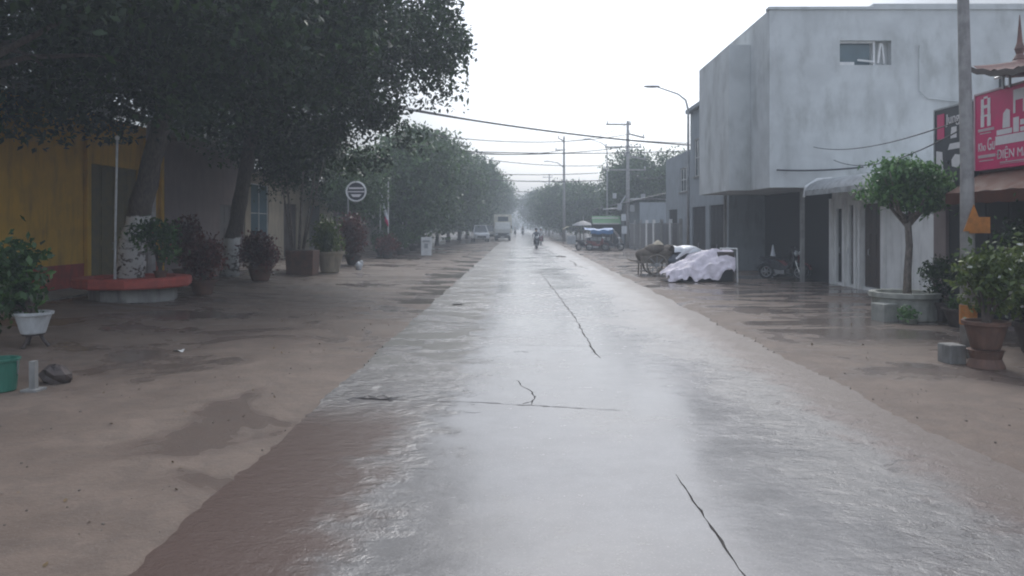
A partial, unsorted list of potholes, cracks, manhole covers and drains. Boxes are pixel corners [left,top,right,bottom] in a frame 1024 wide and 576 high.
crack [676,475,746,576]
crack [335,381,603,413]
crack [540,272,599,357]
